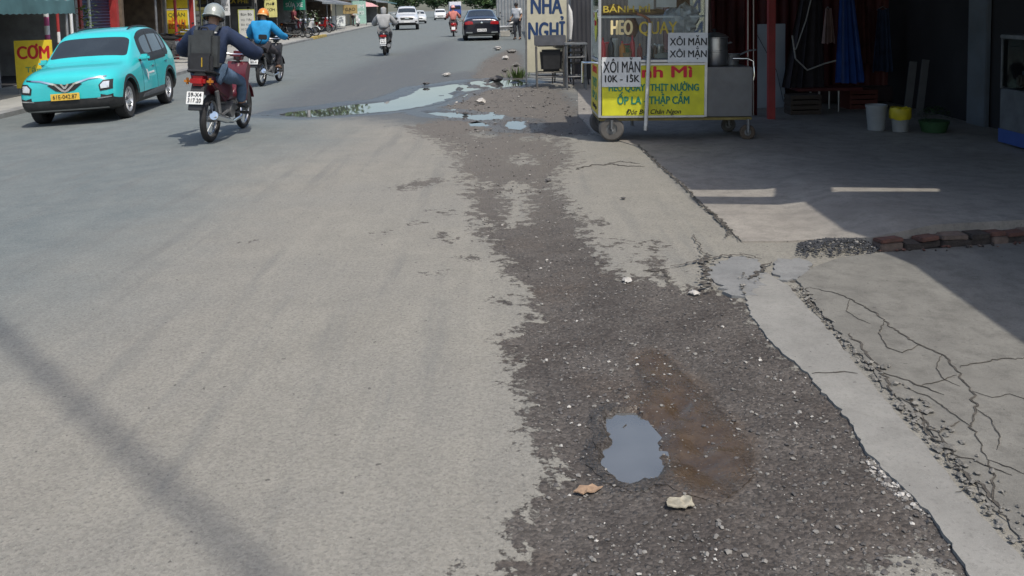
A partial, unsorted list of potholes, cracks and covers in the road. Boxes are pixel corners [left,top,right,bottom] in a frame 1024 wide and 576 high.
crack [789,280,1024,550]
pothole [261,79,535,118]
pothole [586,379,759,505]
pothole [499,119,531,130]
